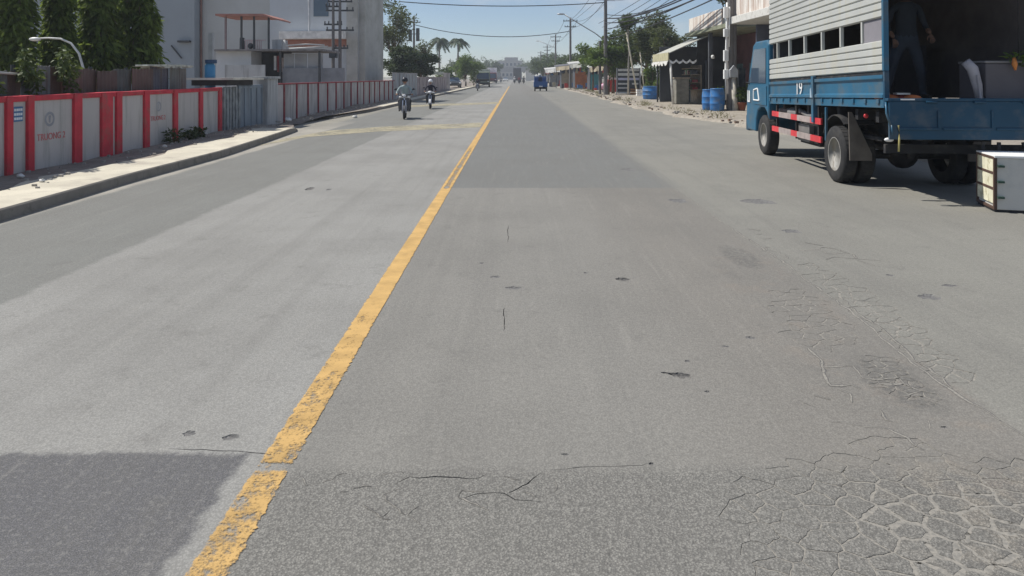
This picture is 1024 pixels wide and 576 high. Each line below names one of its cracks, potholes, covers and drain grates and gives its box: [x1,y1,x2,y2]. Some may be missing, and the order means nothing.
crack [299,471,558,525]
crack [719,263,1024,576]
crack [169,448,293,457]
